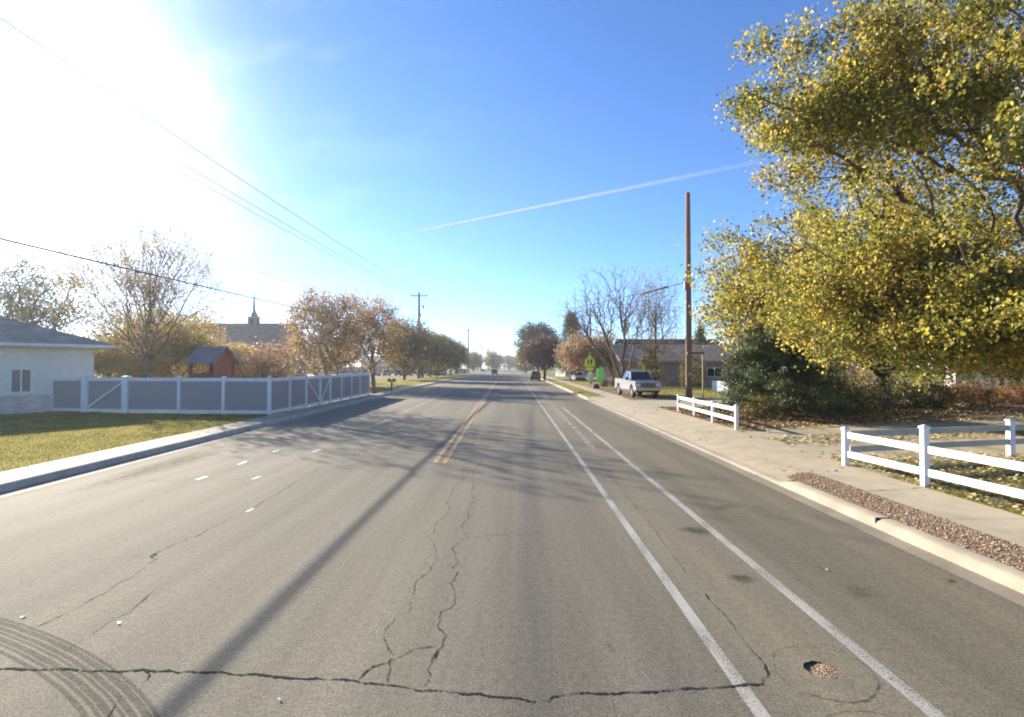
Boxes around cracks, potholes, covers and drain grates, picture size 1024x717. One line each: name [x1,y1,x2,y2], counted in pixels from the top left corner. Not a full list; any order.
crack [0,460,769,702]
